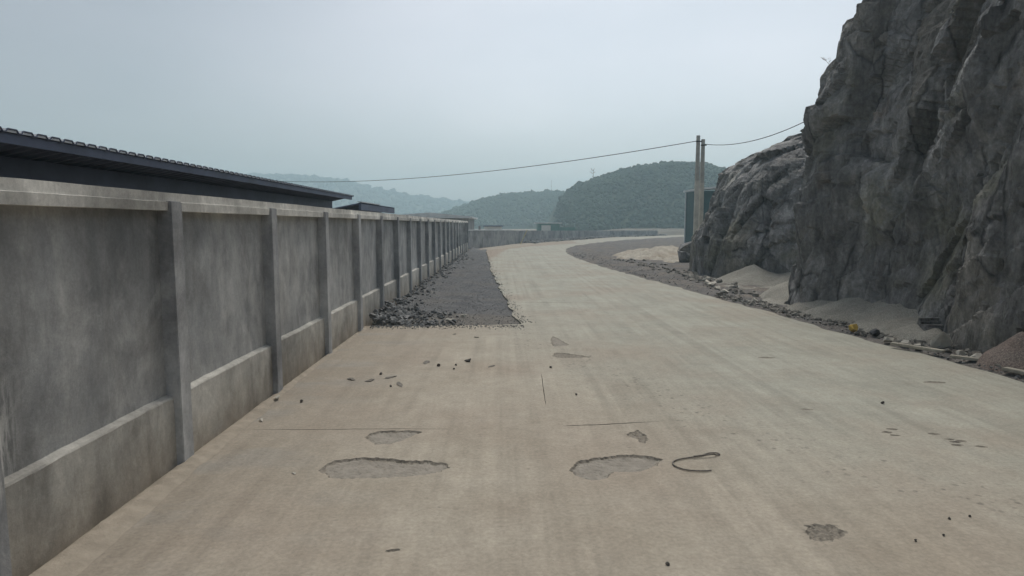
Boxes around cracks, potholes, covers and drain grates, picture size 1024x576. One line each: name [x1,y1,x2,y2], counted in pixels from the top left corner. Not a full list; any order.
pothole [365,430,422,445]
pothole [551,336,569,347]
pothole [569,454,663,480]
pothole [318,457,450,479]
pothole [802,523,848,542]
pothole [627,430,648,443]
